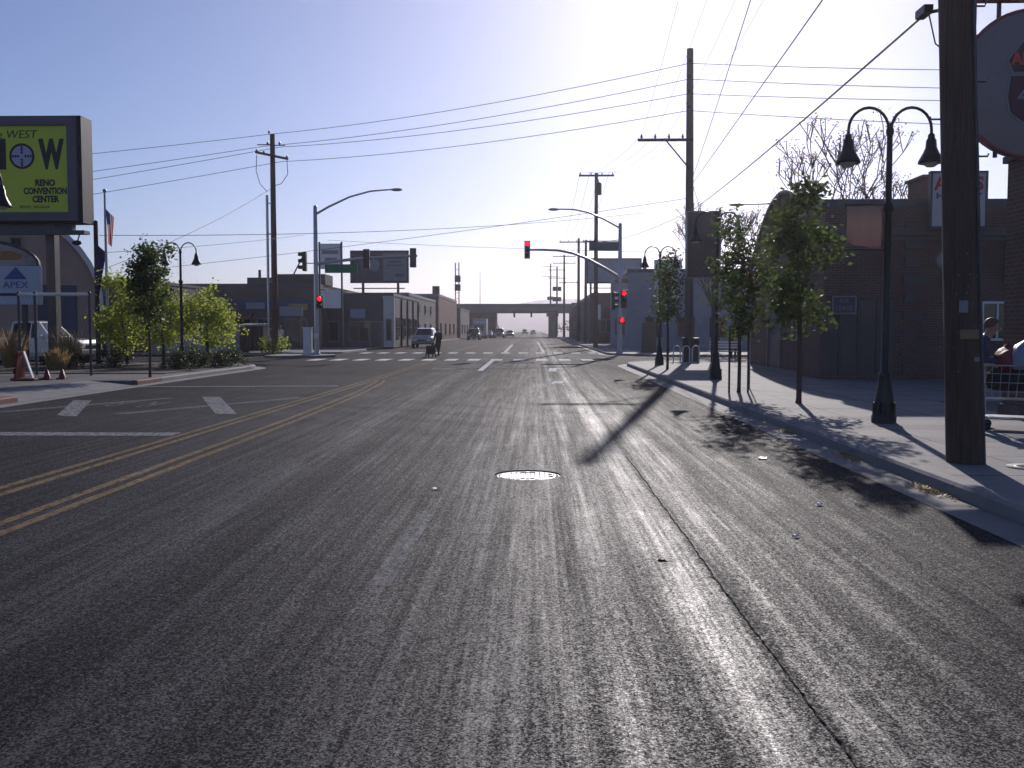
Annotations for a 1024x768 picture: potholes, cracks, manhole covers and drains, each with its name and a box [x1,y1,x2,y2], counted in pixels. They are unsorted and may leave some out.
manhole cover [495,470,561,480]
